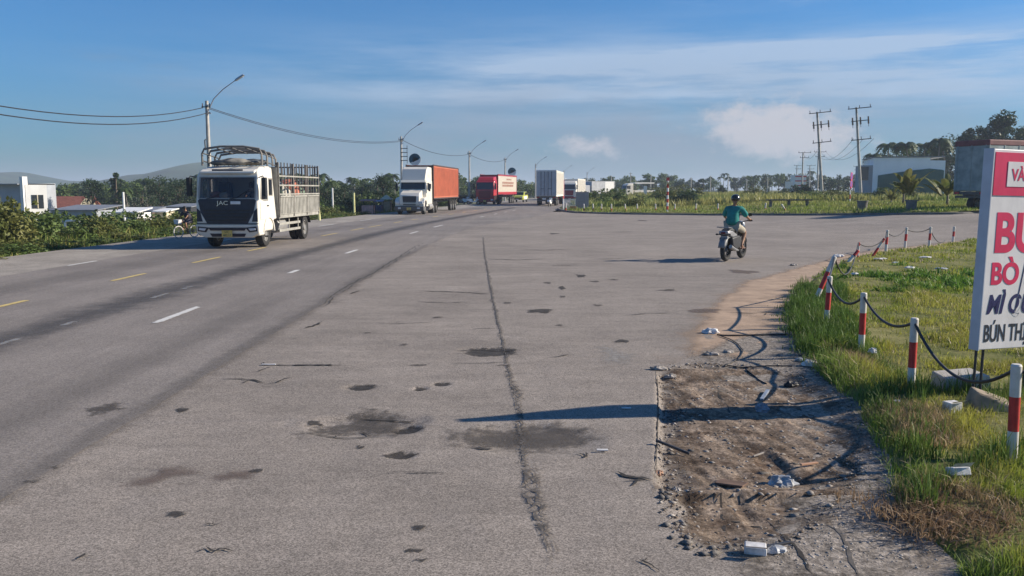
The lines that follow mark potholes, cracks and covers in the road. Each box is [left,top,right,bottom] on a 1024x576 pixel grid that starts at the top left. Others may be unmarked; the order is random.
pothole [394,426,423,434]
pothole [463,347,517,356]
crack [226,362,332,384]
pothole [383,451,419,459]
pothole [655,368,867,544]
